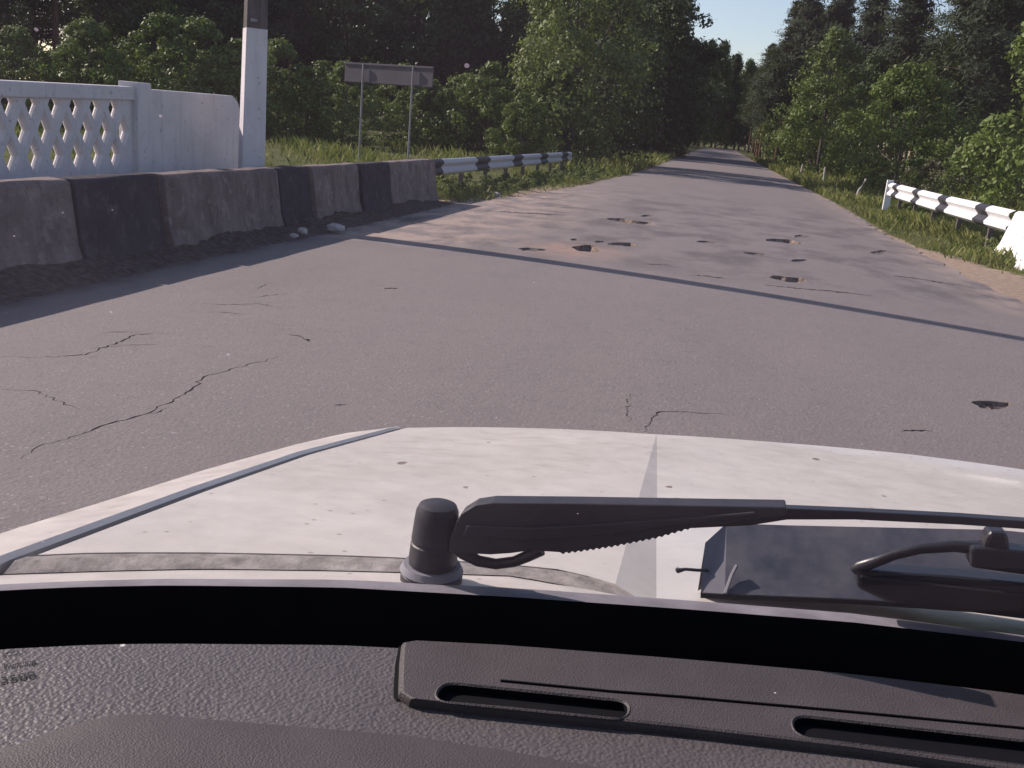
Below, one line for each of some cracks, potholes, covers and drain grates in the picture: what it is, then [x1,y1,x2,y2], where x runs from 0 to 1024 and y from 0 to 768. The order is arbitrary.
pothole [769,275,806,283]
crack [218,283,290,315]
crack [626,394,726,432]
crack [27,332,163,358]
pothole [572,245,601,253]
pothole [971,401,1011,410]
crack [6,355,281,456]
